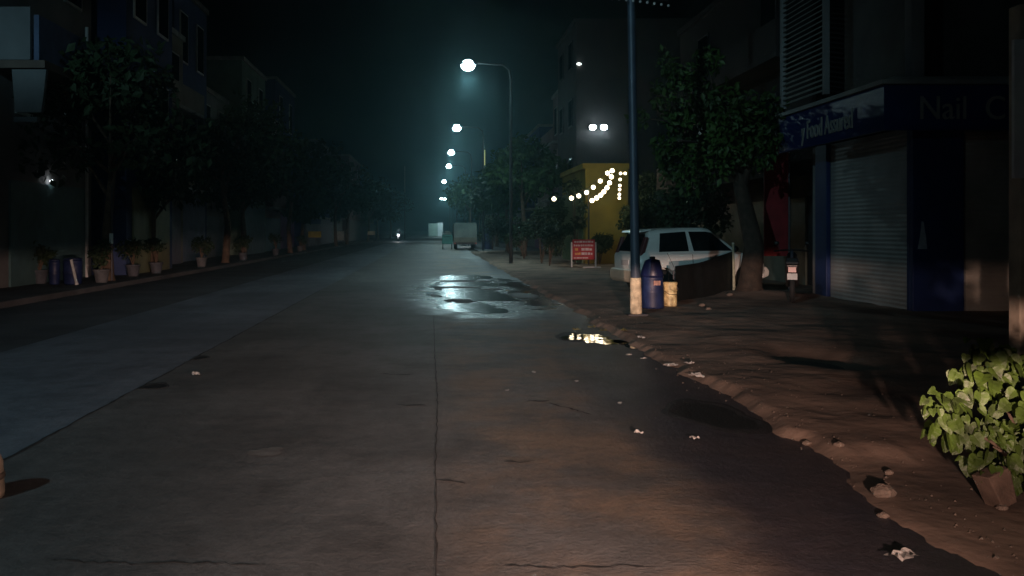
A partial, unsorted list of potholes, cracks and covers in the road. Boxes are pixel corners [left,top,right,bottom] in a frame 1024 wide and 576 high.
pothole [555,332,585,342]
pothole [660,398,773,434]
